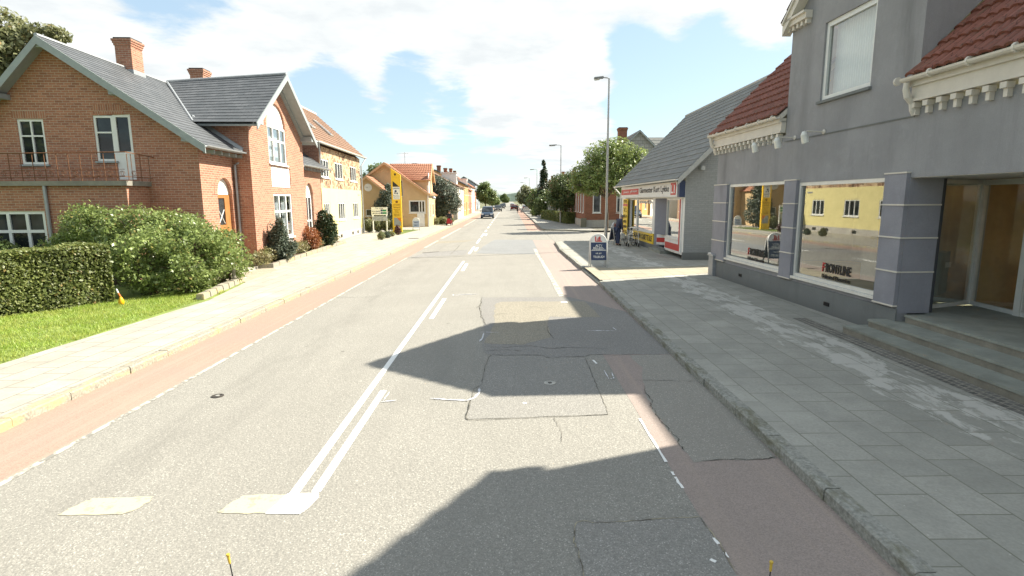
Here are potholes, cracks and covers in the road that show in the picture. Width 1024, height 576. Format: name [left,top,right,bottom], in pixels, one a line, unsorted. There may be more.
crack [465,327,645,442]
crack [573,516,735,576]
